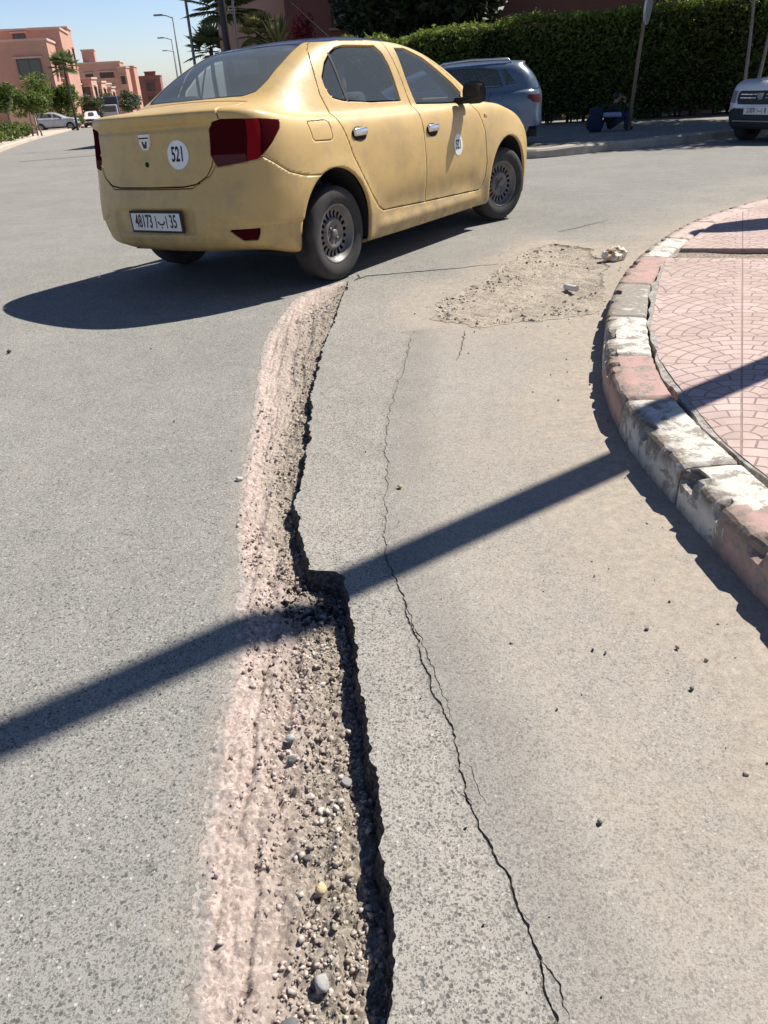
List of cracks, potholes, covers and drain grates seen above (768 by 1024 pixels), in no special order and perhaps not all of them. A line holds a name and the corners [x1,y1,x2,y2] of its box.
pothole [183,281,396,1024]
crack [382,338,570,1024]
crack [355,264,495,280]
